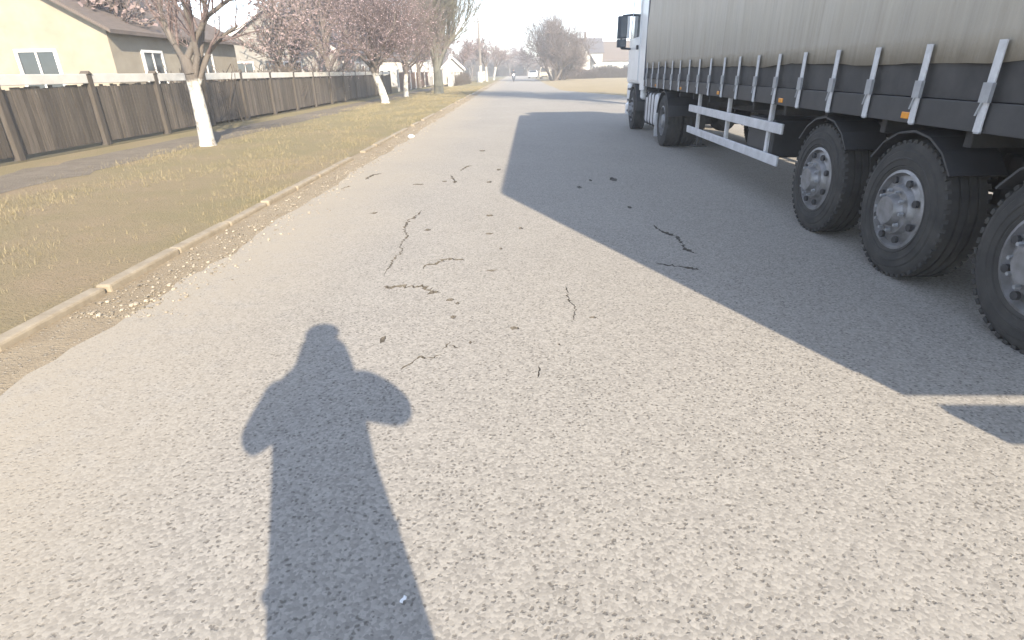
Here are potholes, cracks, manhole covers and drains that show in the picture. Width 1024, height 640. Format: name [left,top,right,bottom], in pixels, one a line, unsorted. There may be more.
crack [401,343,458,369]
crack [654,225,699,270]
crack [384,212,465,294]
